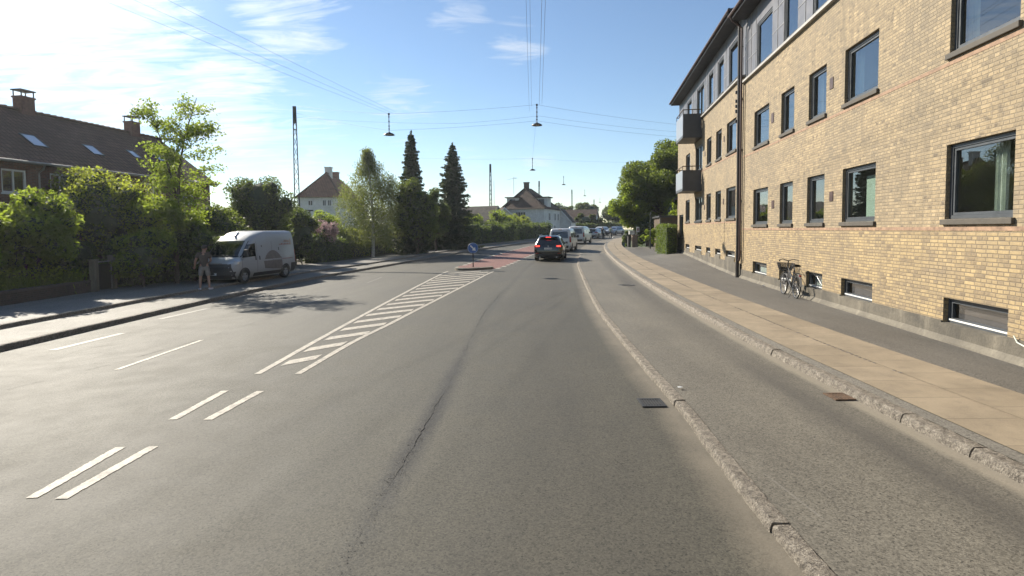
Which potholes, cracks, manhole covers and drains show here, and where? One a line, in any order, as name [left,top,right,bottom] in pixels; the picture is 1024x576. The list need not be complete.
drain grate [823,392,856,401]
drain grate [637,398,667,408]
